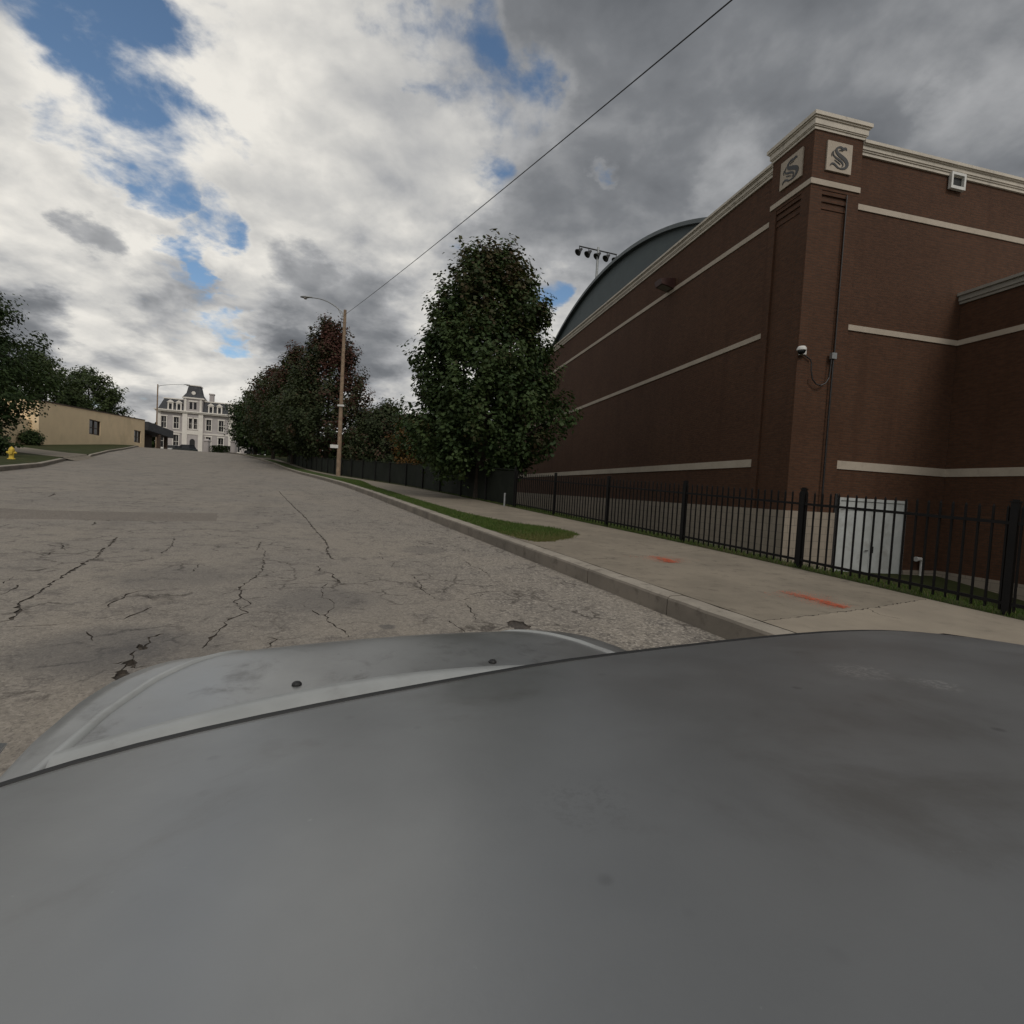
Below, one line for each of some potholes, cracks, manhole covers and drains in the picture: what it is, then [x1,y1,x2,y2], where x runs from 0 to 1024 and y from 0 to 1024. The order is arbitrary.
crack [399,557,498,632]
crack [105,589,160,672]
crack [202,493,426,648]
pothole [507,620,531,630]
crack [0,520,152,627]
